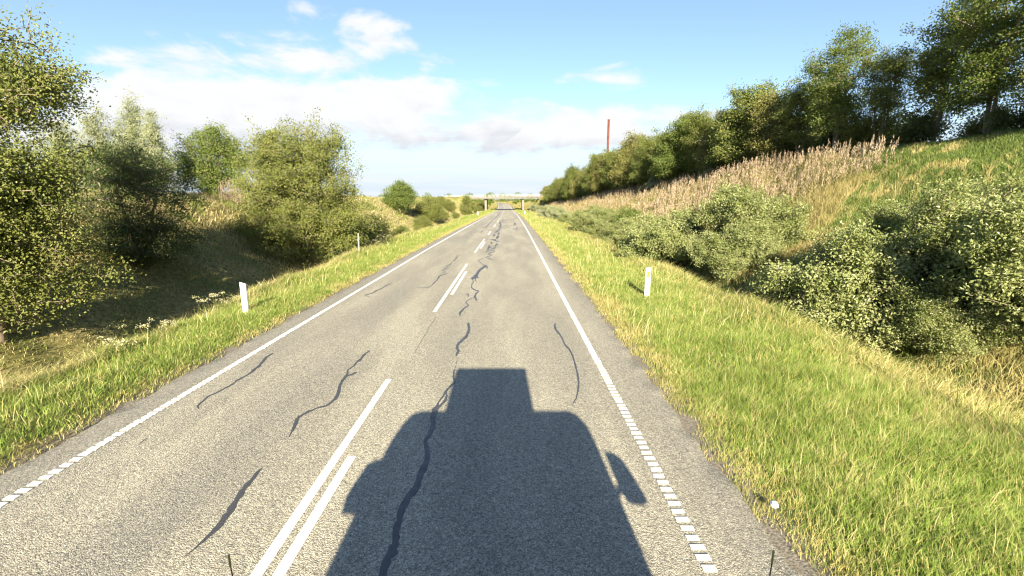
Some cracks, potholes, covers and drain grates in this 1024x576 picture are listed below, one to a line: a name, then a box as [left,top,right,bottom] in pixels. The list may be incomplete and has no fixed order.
crack [481,217,504,260]
crack [183,468,262,558]
